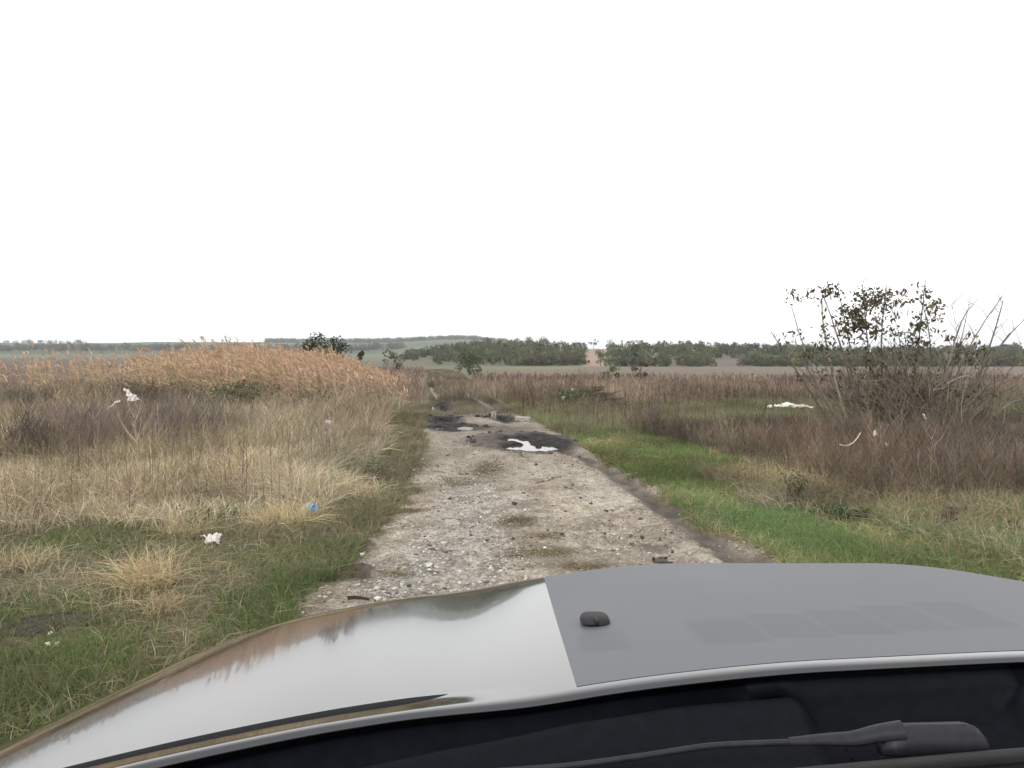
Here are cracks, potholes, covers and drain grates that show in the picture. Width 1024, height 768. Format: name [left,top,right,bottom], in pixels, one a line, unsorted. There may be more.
pothole [427,422,486,432]
pothole [480,414,515,424]
pothole [467,430,583,454]
